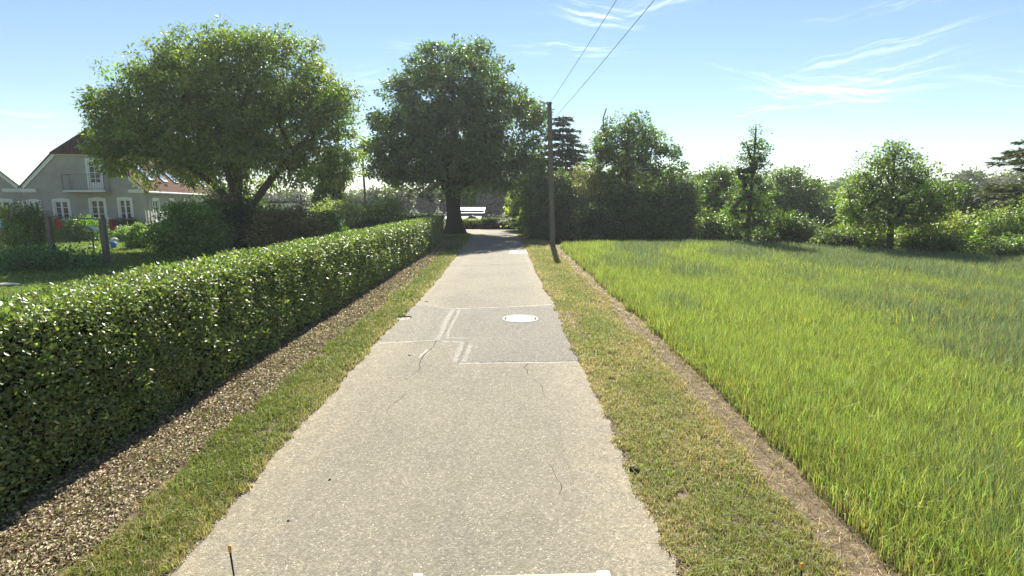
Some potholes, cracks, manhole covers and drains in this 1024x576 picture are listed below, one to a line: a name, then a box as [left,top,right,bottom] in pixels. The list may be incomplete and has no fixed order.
crack [386,342,436,411]
manhole cover [502,315,538,323]
